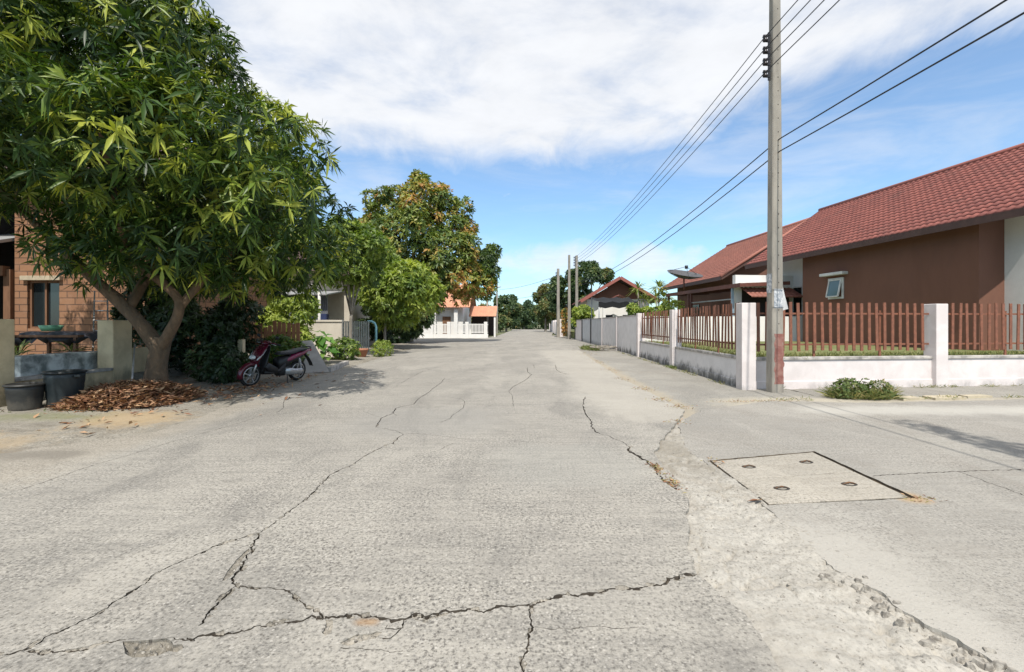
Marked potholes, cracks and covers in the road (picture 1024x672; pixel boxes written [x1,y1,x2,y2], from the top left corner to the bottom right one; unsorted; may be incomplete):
manhole cover [709,451,915,505]
pothole [123,638,184,657]
crack [0,379,697,672]
